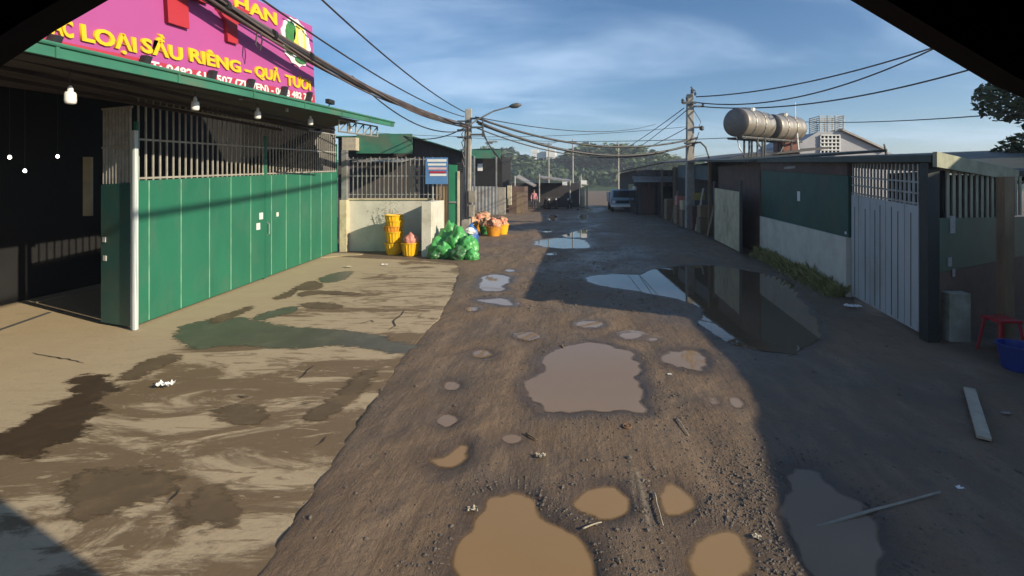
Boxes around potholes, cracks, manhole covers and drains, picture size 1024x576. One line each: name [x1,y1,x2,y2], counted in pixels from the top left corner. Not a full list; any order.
pothole [562,475,644,527]
pothole [473,273,516,292]
pothole [427,407,470,430]
pothole [653,346,718,375]
pothole [572,320,611,329]
pothole [647,472,711,523]
pothole [434,482,618,576]
pothole [762,458,913,576]
pothole [512,332,540,342]
pothole [581,264,831,357]
pothole [515,339,660,417]
pothole [415,436,484,473]
